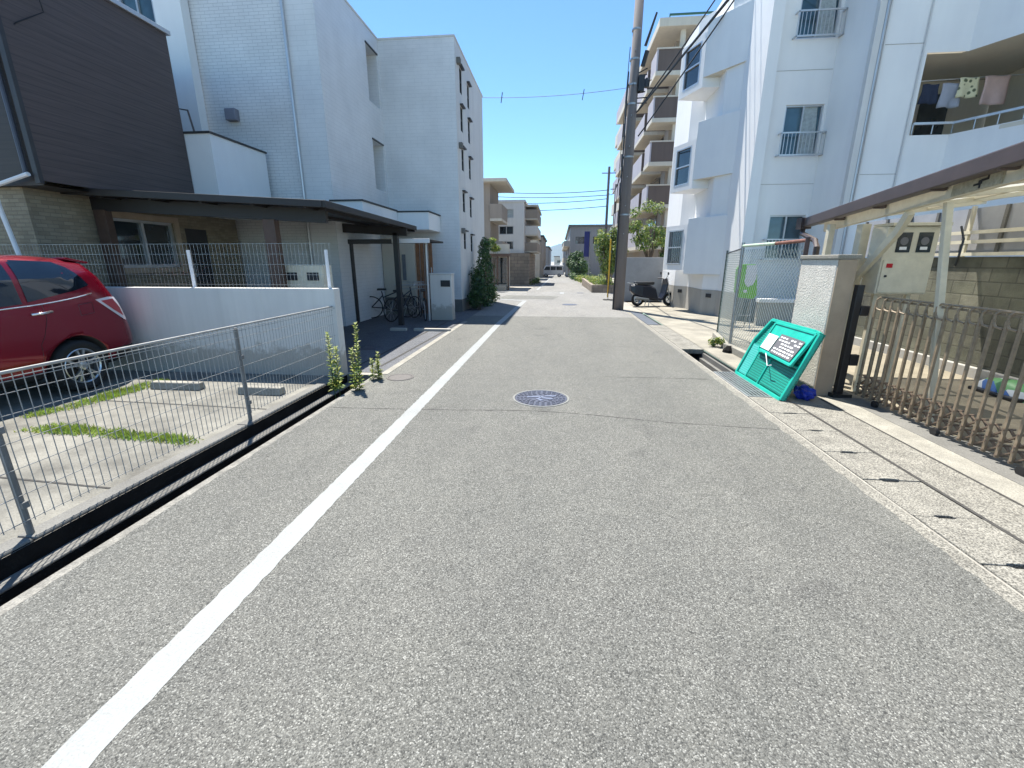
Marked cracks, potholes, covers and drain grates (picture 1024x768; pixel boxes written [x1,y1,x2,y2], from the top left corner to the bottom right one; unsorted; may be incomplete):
drain grate [713,371,772,398]
manhole cover [513,390,569,407]
